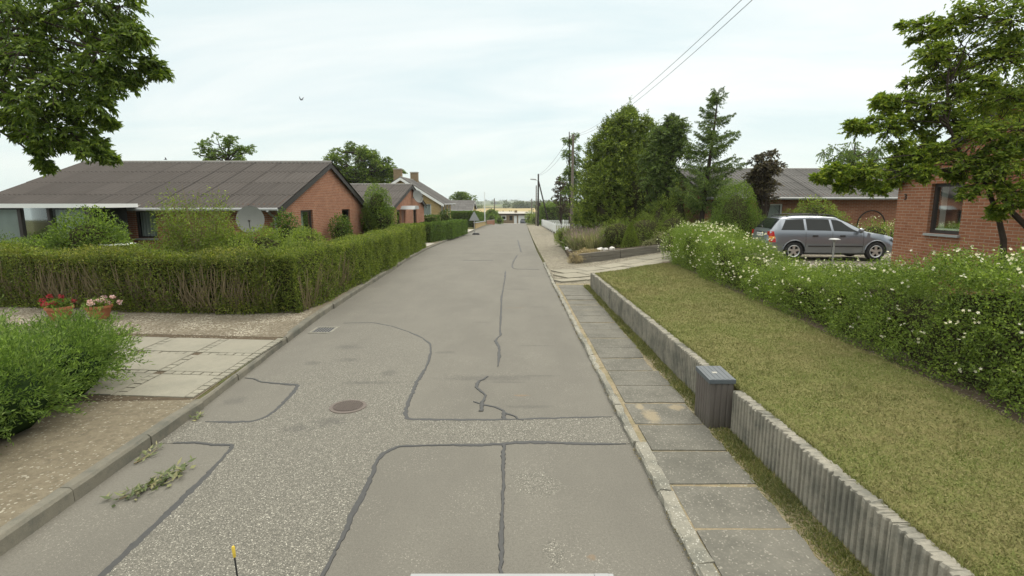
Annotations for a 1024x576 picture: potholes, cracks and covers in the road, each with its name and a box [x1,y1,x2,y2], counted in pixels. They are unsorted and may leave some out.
manhole cover [329,400,367,414]
